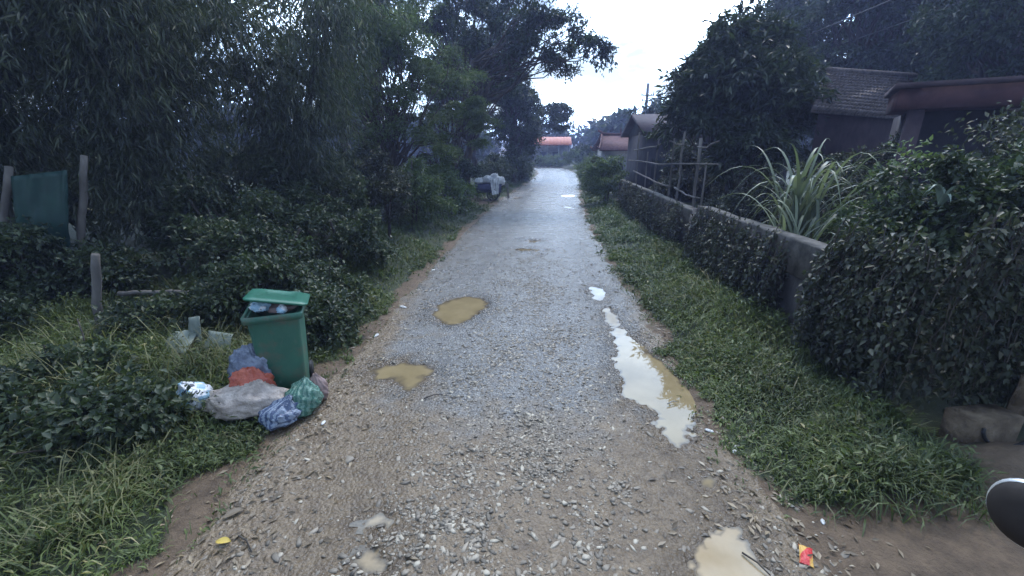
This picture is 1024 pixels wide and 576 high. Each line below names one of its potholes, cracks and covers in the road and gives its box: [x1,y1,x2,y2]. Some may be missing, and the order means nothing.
pothole [342,540,401,576]
pothole [598,306,705,454]
pothole [586,285,612,304]
pothole [425,294,498,327]
pothole [359,357,441,394]
pothole [683,516,785,576]
